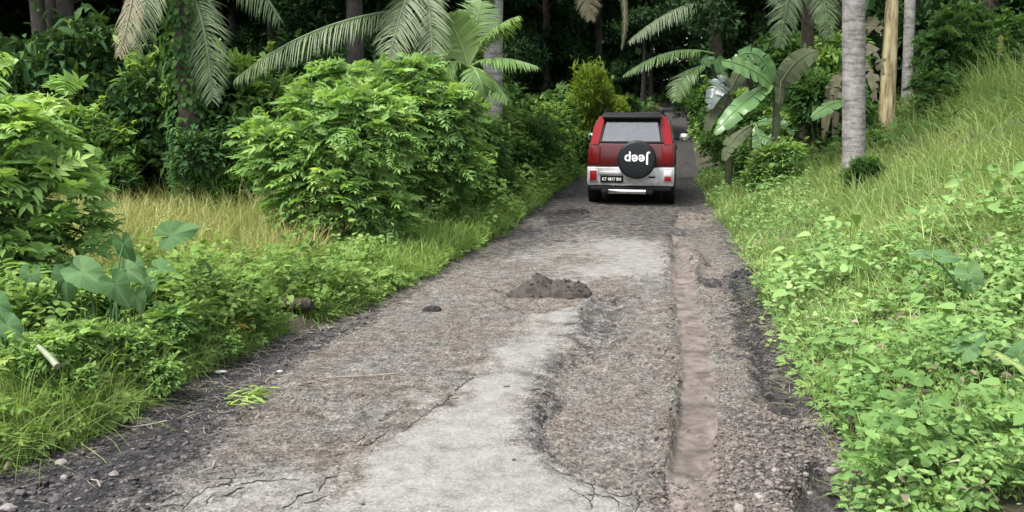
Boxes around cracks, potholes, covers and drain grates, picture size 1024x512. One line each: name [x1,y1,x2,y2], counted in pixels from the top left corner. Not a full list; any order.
crack [334,374,478,457]
pothole [583,298,621,354]
crack [143,460,338,510]
pothole [544,360,660,479]
crack [542,461,671,511]
